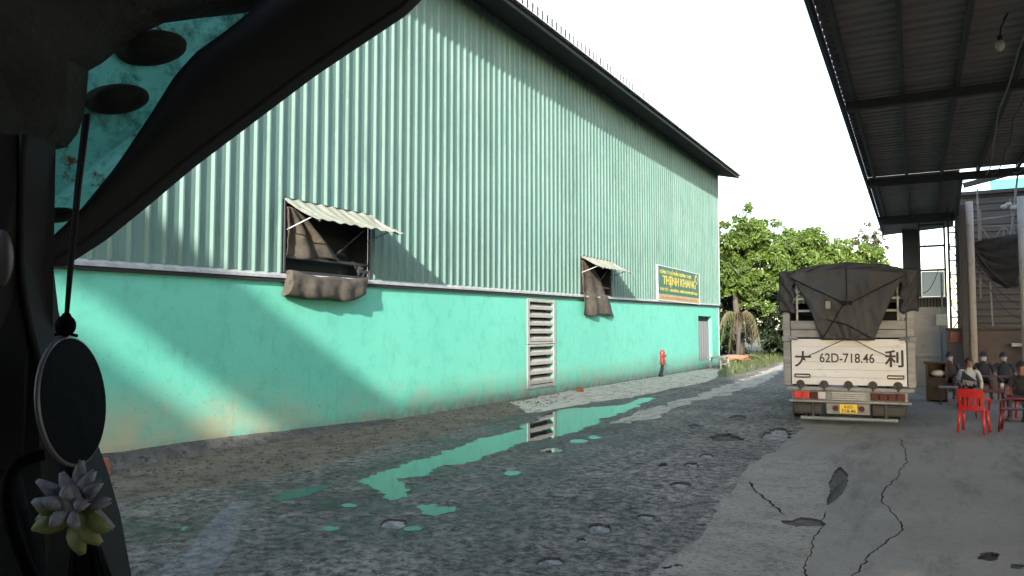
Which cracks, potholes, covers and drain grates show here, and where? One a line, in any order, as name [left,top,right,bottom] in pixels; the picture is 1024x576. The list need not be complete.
pothole [827,467,848,505]
pothole [707,433,744,442]
pothole [380,518,407,529]
pothole [758,428,793,441]
pothole [977,552,1000,561]
pothole [537,557,564,566]
crack [749,438,908,576]
pothole [781,517,826,527]
pothole [588,523,611,533]
